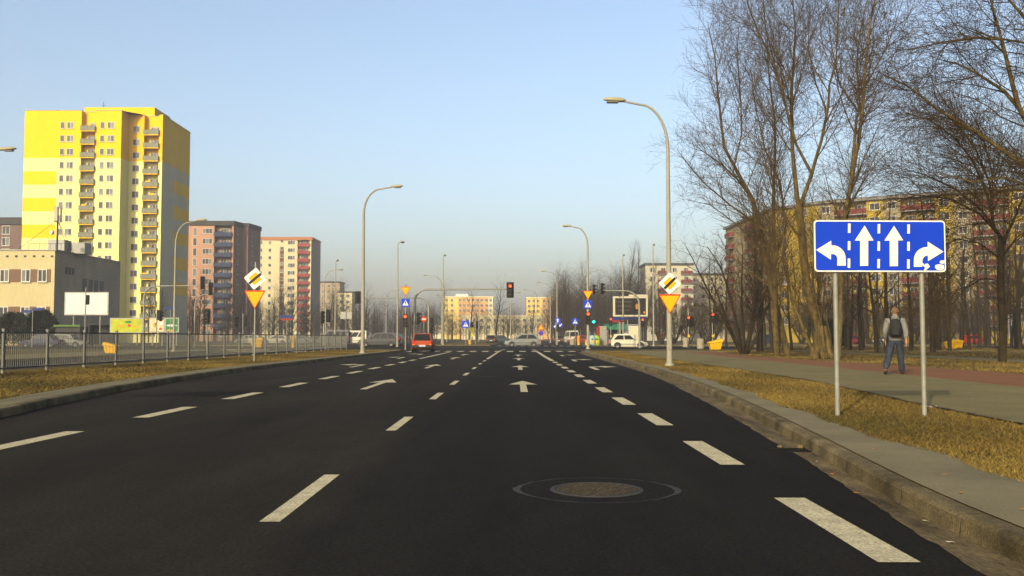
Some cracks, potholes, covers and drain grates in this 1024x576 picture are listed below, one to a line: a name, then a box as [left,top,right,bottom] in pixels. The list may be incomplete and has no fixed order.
manhole cover [550,482,644,497]
